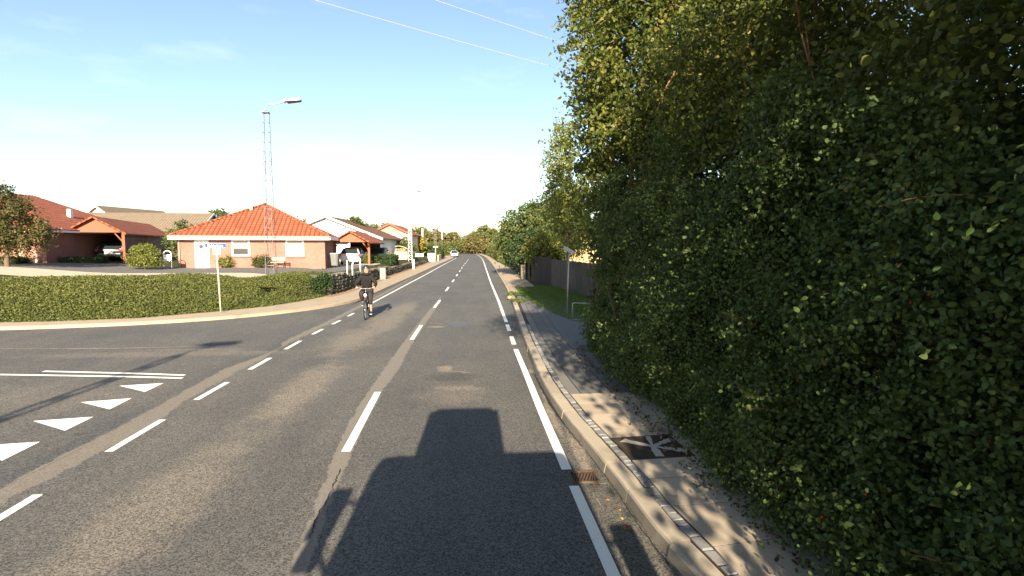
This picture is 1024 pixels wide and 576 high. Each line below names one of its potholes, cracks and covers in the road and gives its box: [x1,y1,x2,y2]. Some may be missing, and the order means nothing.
drain grate [569,470,600,483]
crack [309,469,341,538]
manhole cover [613,436,688,461]
